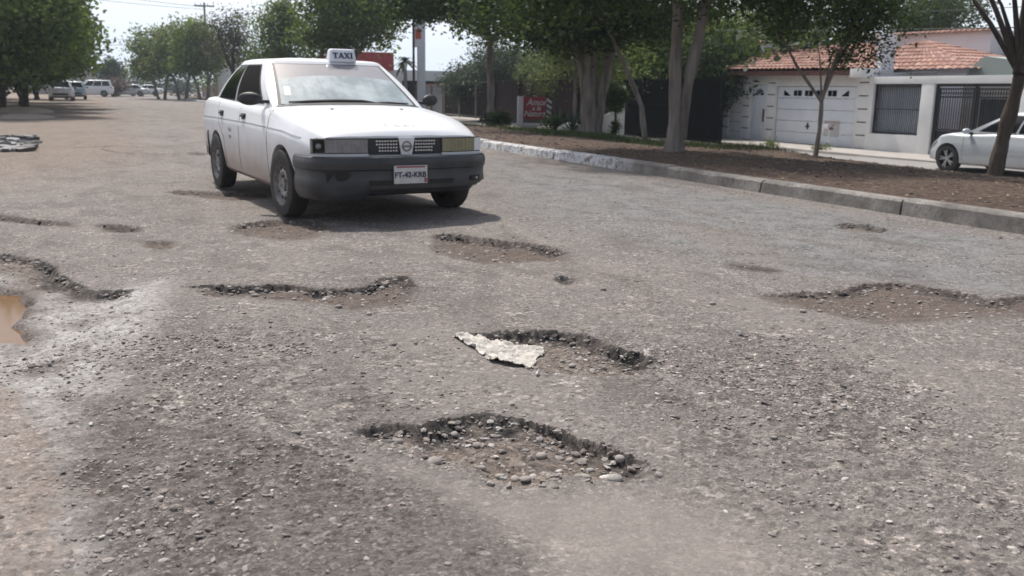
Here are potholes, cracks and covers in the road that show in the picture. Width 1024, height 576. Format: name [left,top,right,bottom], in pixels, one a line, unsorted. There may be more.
pothole [183,276,419,310]
pothole [224,218,330,241]
pothole [0,253,147,387]
pothole [834,222,894,233]
pothole [0,215,76,228]
pothole [429,233,574,263]
pothole [727,263,784,274]
pothole [340,412,658,490]
pothole [90,223,146,233]
pothole [552,276,579,286]
pothole [143,240,178,250]
pothole [756,282,1024,325]
